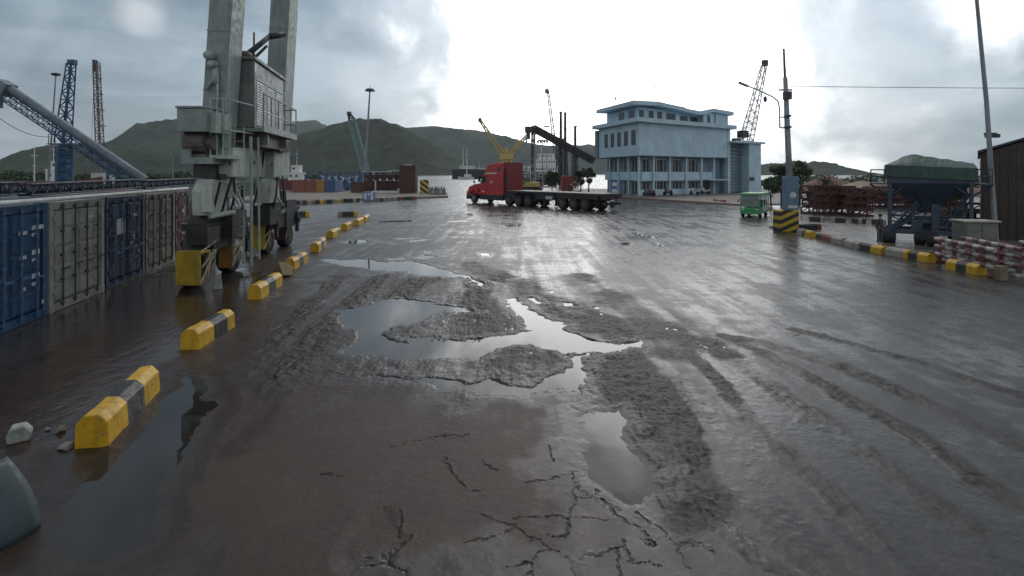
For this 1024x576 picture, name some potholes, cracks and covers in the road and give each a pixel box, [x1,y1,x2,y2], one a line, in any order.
crack [358,509,414,576]
pothole [333,297,646,397]
crack [389,433,499,493]
crack [462,444,766,576]
pothole [321,258,487,289]
